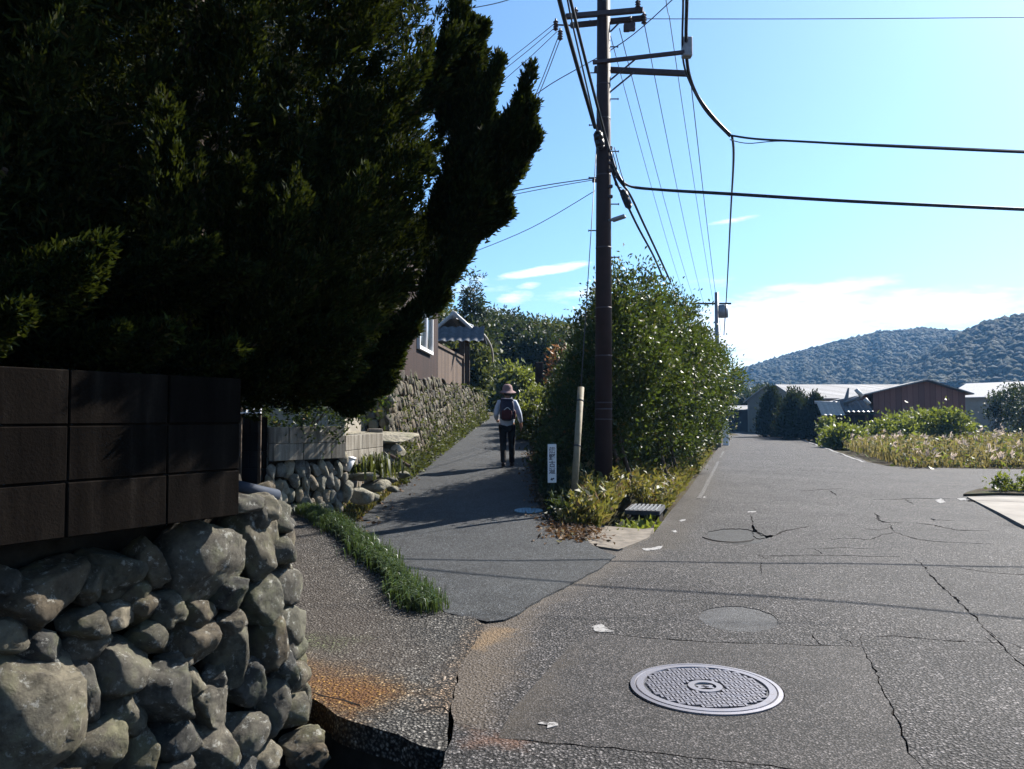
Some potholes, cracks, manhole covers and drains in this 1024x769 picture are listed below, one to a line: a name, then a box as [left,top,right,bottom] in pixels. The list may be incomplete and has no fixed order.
crack [591,560,1024,769]
manhole cover [630,663,784,716]
drain grate [625,504,665,515]
crack [833,513,982,544]
crack [702,516,809,543]
